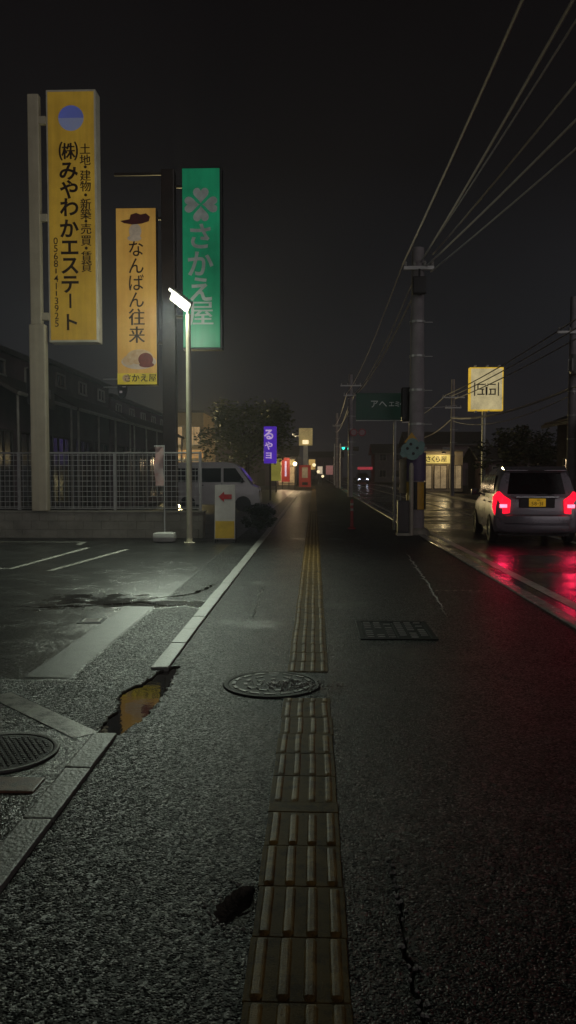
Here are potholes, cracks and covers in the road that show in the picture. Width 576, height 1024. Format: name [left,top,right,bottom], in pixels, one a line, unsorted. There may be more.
crack [22,584,215,608]
crack [408,555,487,617]
crack [251,588,265,616]
manhole cover [223,671,344,699]
pothole [188,868,259,941]
manhole cover [0,732,60,774]
crack [385,857,430,1024]
pothole [97,665,181,736]
